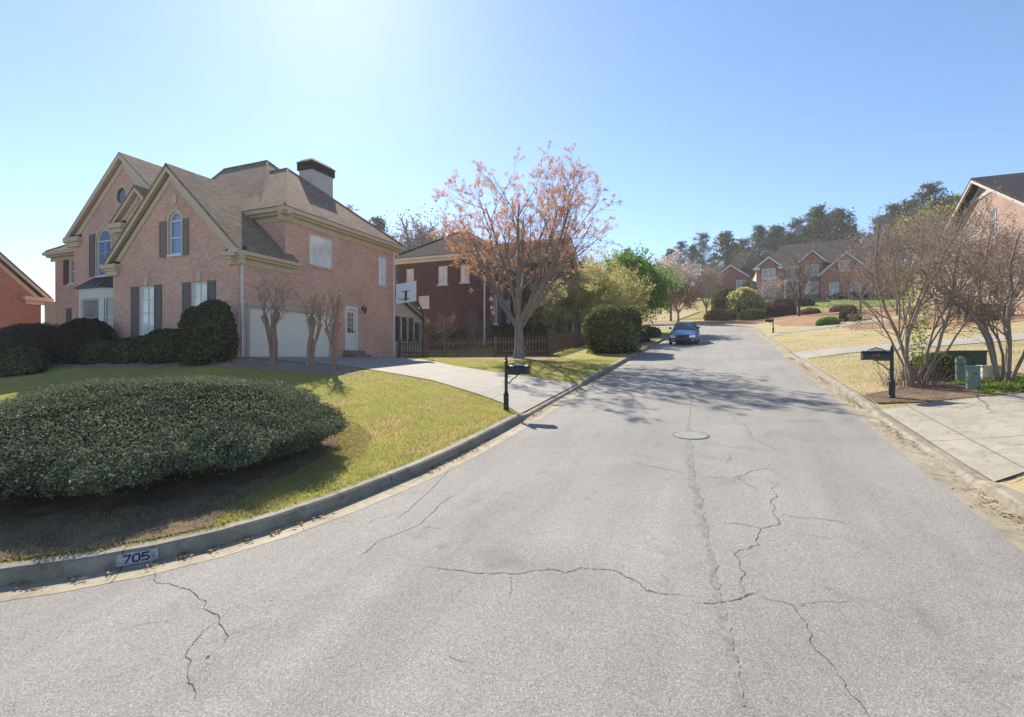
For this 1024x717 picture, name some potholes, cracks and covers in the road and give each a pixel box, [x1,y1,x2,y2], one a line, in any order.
crack [153,561,240,698]
crack [698,408,869,717]
crack [406,564,681,598]
manhole cover [673,431,710,440]
